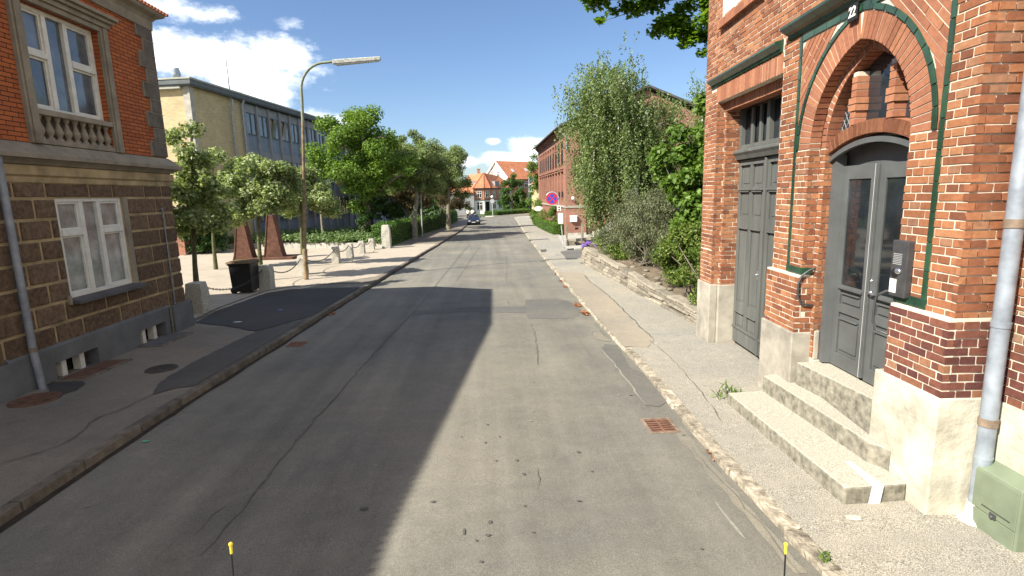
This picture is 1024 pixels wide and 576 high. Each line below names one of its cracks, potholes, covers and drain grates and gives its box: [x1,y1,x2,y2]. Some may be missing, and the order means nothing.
manhole cover [6,391,63,408]
crack [3,394,161,463]
drain grate [640,417,681,434]
manhole cover [144,364,178,374]
